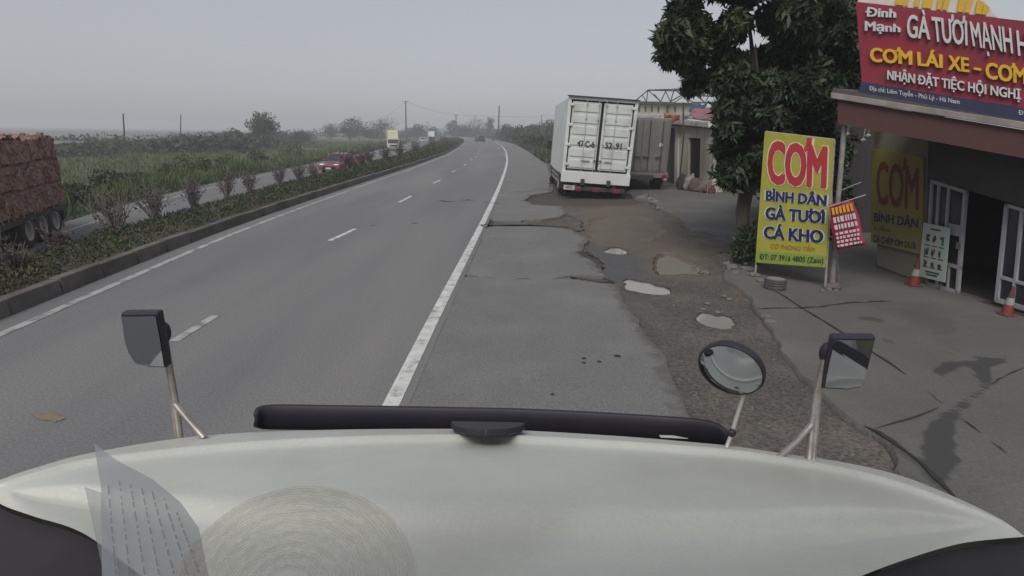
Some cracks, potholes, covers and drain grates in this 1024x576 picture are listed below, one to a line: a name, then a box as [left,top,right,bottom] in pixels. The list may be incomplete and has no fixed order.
pothole [696,312,736,330]
crack [762,291,905,374]
pothole [603,247,628,255]
pothole [623,278,671,295]
pothole [652,251,708,275]
